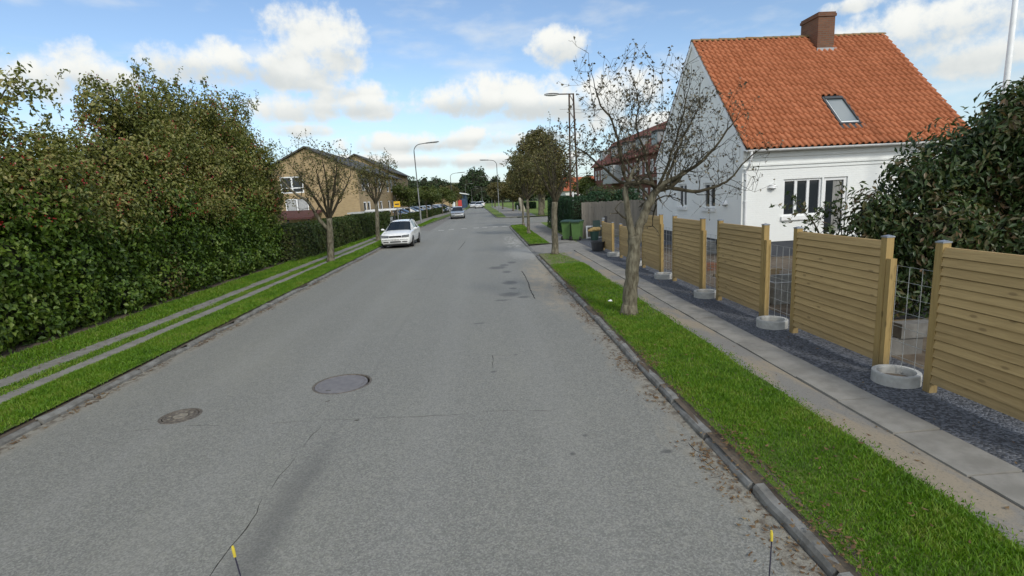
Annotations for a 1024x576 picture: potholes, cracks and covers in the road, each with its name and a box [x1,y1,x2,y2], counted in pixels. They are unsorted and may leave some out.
manhole cover [312,374,372,394]
manhole cover [158,408,203,424]
crack [121,410,547,576]
